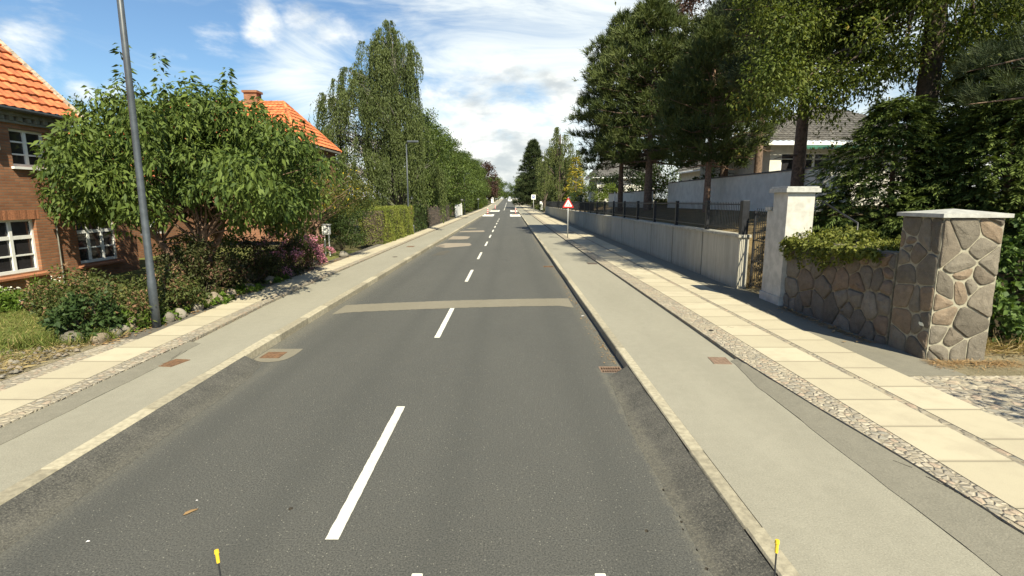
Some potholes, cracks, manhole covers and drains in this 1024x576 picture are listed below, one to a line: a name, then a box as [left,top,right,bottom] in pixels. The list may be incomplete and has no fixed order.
manhole cover [159,359,190,367]
